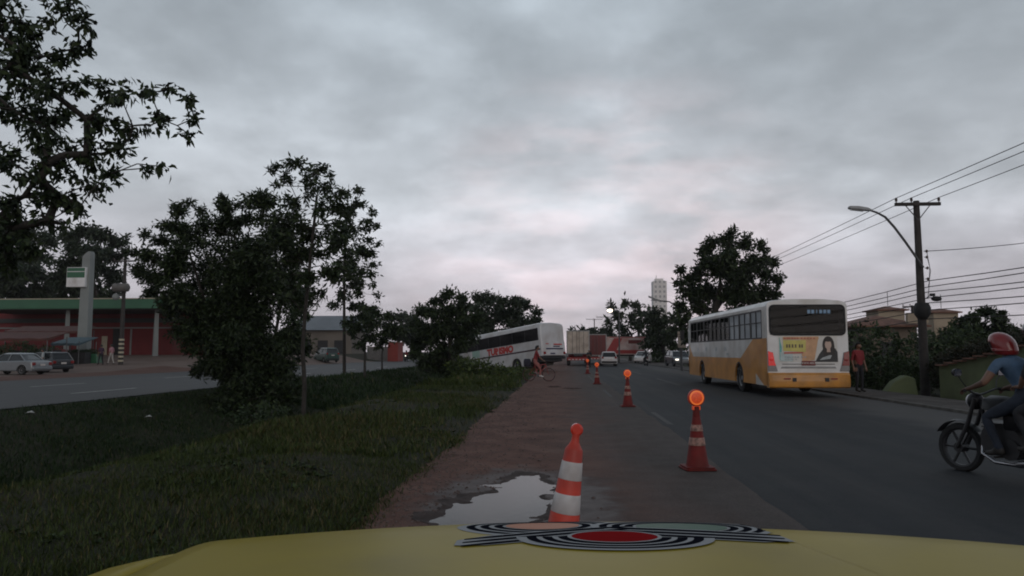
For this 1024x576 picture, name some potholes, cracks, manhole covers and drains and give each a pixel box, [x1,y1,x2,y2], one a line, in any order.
pothole [411,471,556,526]
